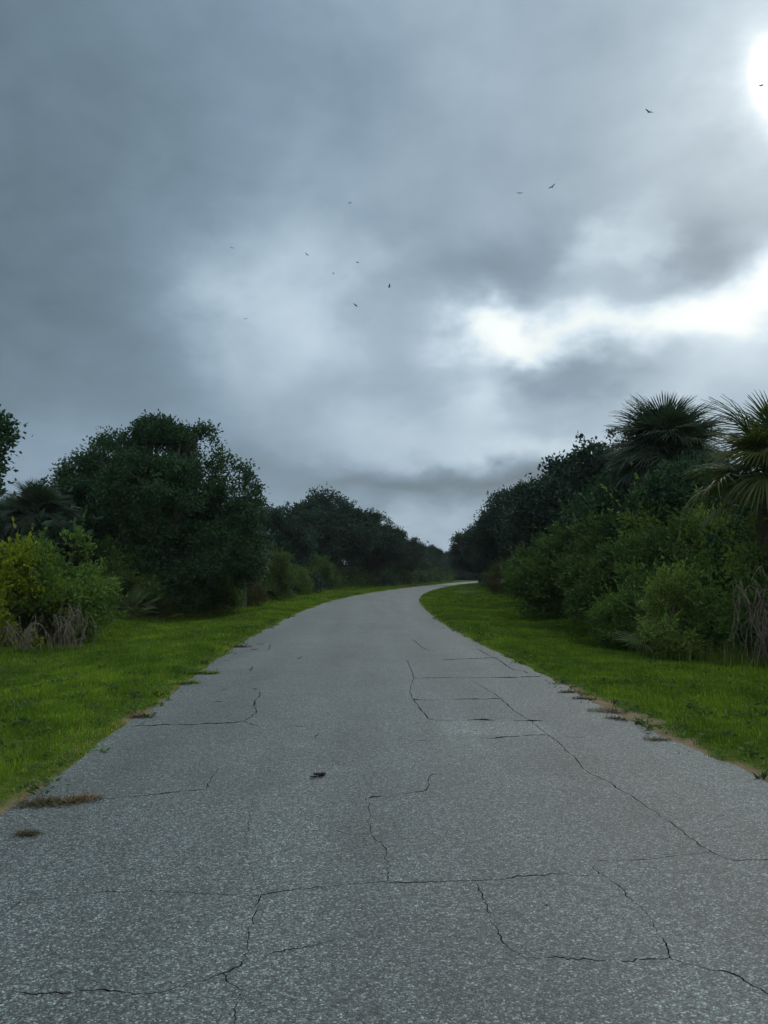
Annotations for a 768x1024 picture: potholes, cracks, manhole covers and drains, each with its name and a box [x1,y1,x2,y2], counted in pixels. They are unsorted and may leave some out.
crack [5,800,605,1024]
crack [407,644,765,992]
crack [133,691,260,727]
